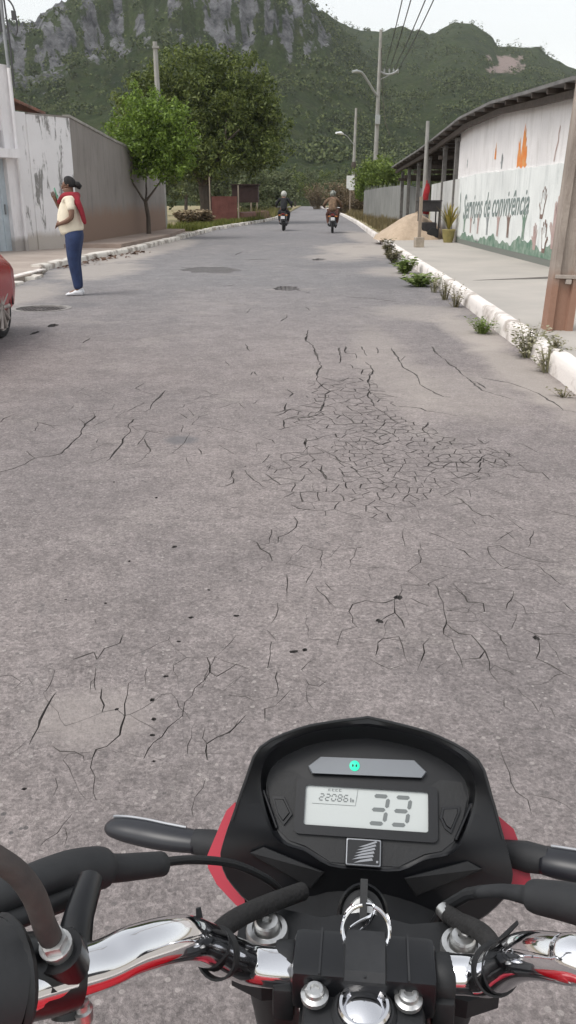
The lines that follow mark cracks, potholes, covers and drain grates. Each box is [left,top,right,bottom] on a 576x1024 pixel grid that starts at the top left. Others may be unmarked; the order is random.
crack [0,331,574,807]
manhole cover [11,304,72,312]
